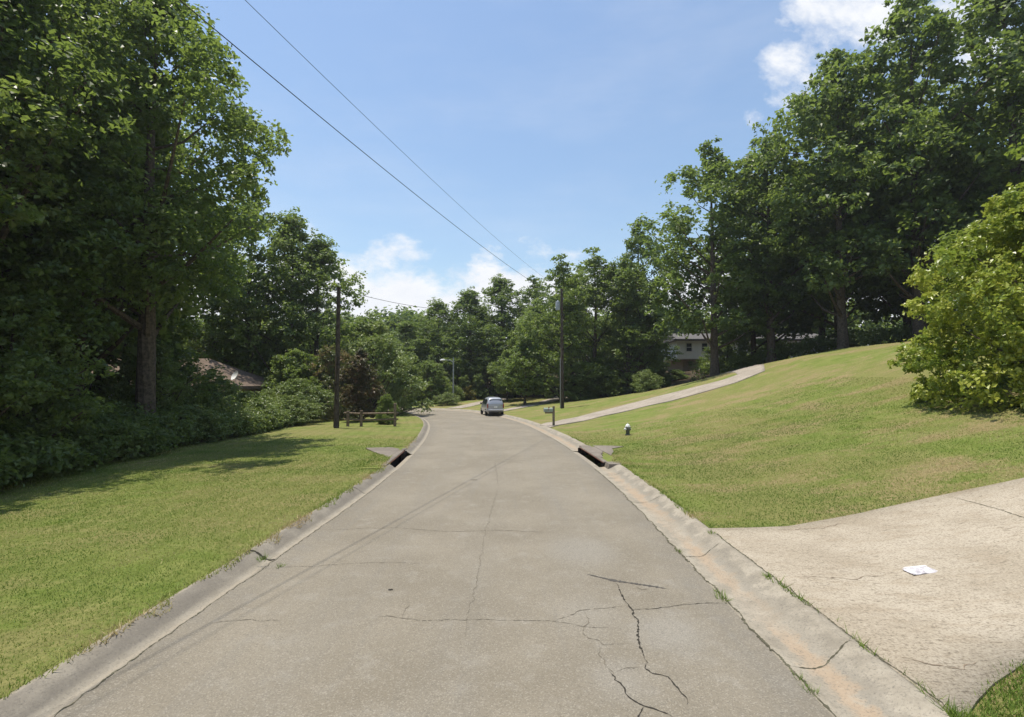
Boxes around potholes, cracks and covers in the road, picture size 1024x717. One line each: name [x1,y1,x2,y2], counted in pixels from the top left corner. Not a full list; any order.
drain grate [572,445,624,469]
drain grate [366,447,413,468]
crack [379,583,726,717]
